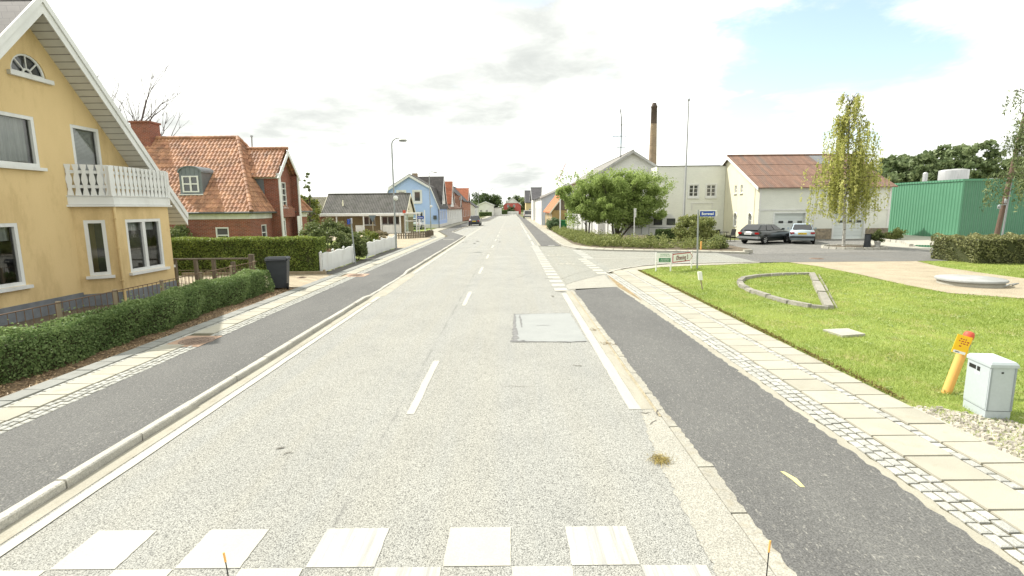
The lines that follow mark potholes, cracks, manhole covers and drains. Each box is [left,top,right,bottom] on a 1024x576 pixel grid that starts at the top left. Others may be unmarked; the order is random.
manhole cover [168,336,221,347]
